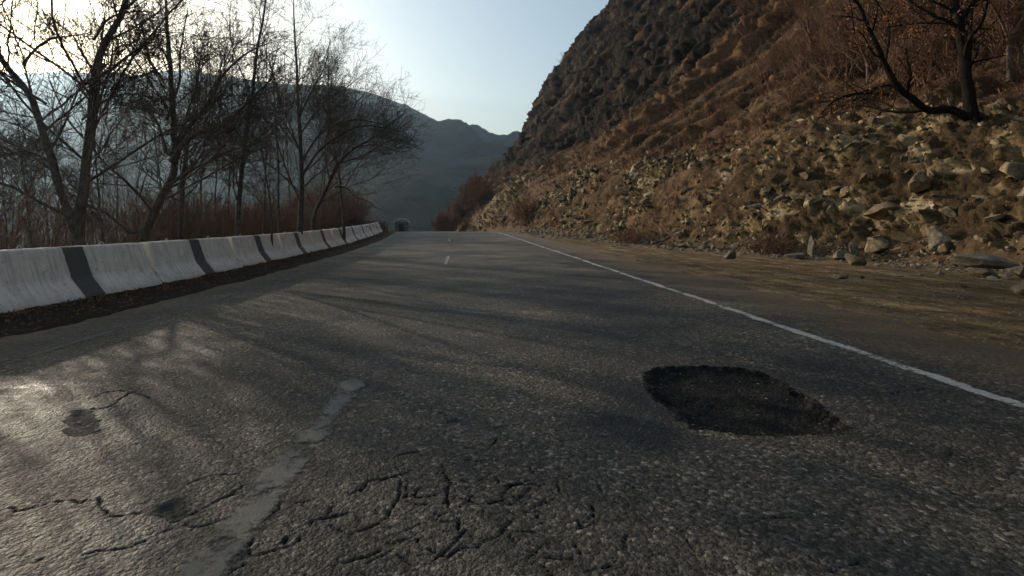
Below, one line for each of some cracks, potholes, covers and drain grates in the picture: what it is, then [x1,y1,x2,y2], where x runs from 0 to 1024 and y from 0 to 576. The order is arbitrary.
crack [12,498,137,518]
crack [185,460,693,576]
pothole [61,409,102,437]
pothole [642,365,853,438]
